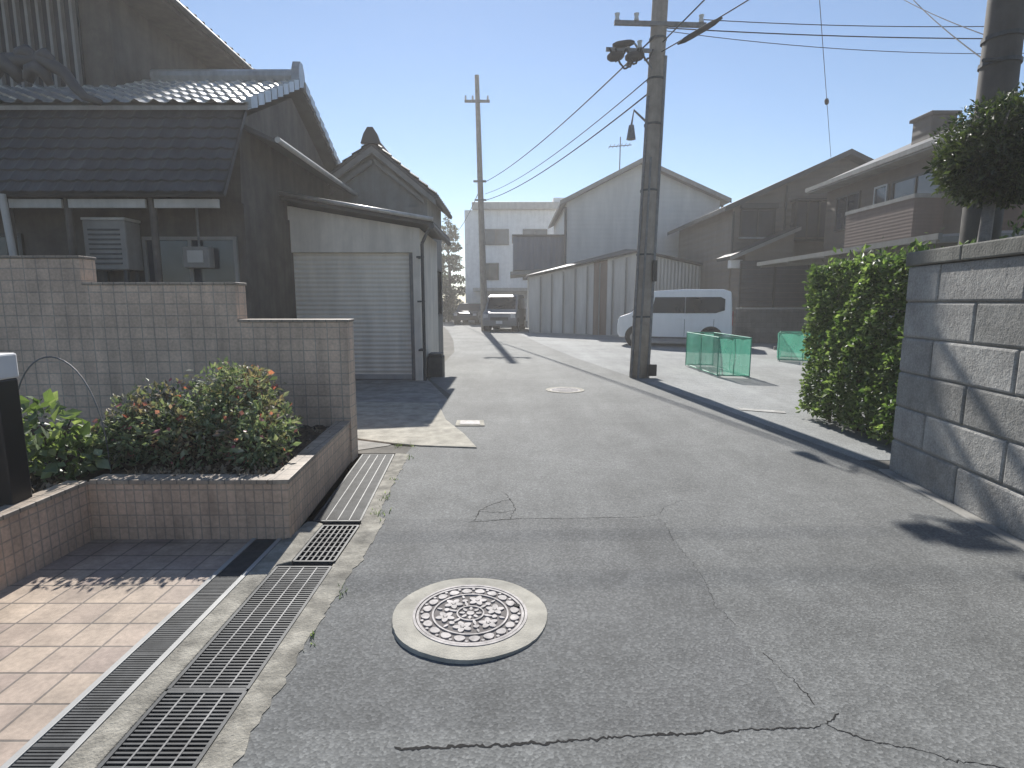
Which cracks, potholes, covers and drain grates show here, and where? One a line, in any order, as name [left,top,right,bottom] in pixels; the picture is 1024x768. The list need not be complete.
crack [473,493,682,522]
drain grate [313,454,394,525]
drain grate [292,525,360,566]
manhole cover [392,578,548,664]
crack [394,653,1005,768]
drain grate [167,566,332,691]
drain grate [97,690,247,768]
